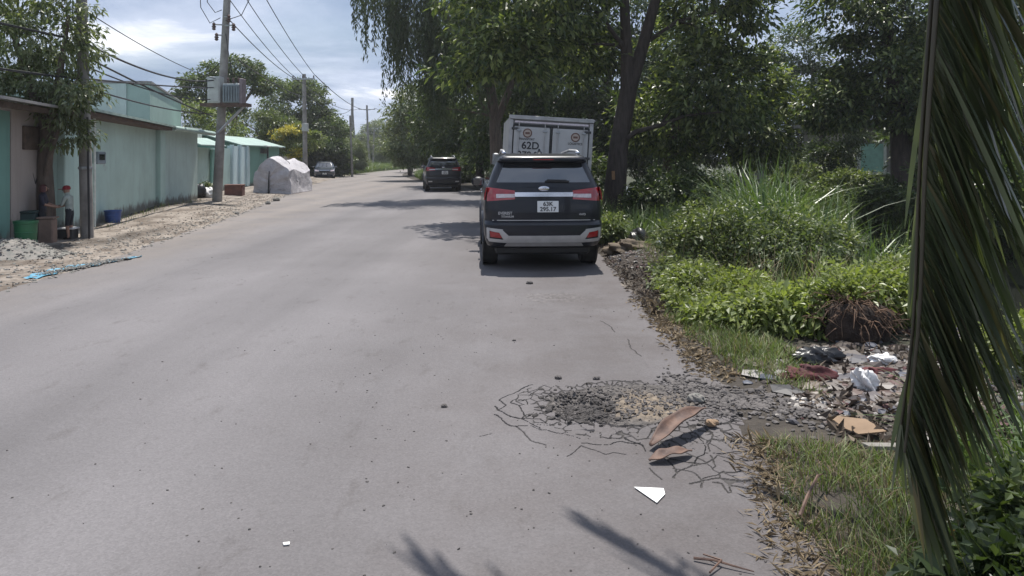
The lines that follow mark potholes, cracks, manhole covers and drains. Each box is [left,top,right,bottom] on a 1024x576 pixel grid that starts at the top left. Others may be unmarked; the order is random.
pothole [528,381,741,433]
crack [480,380,786,493]
